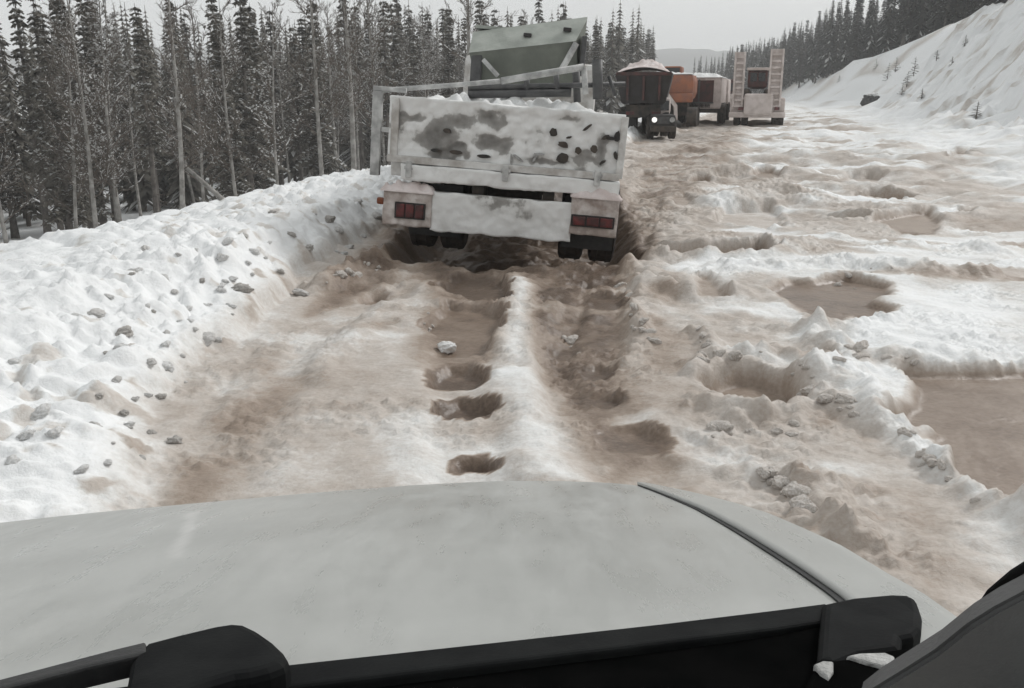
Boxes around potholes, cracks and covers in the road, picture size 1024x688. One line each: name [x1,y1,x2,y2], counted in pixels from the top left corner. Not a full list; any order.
pothole [767,270,900,320]
pothole [591,421,675,456]
pothole [434,395,499,420]
pothole [426,365,489,391]
pothole [870,205,943,235]
pothole [450,456,501,473]
